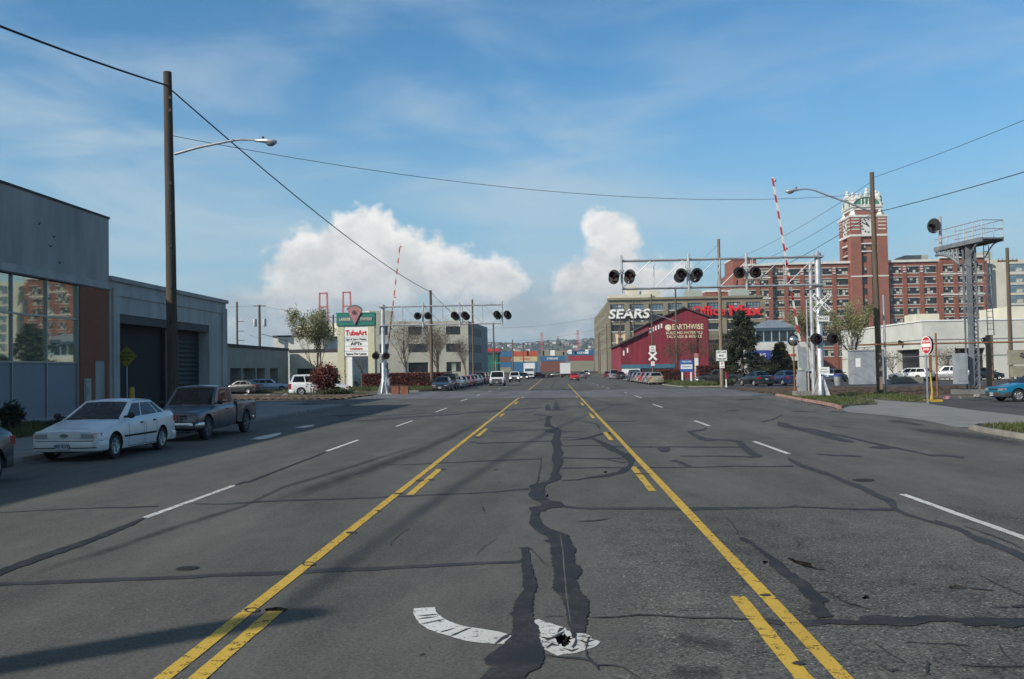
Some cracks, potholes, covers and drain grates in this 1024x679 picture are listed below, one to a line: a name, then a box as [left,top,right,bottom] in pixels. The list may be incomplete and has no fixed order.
pothole [787,557,823,570]
pothole [555,634,572,647]
crack [542,615,641,679]
